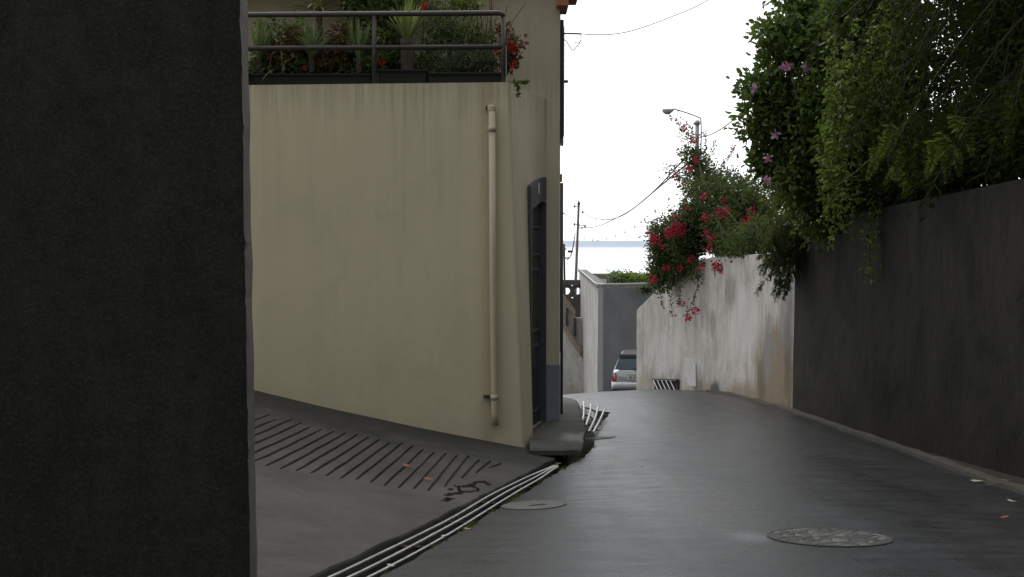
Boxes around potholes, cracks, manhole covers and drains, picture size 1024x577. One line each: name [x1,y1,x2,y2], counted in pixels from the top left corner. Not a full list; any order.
drain grate [581,401,606,434]
drain grate [328,464,559,577]
manhole cover [767,527,893,547]
manhole cover [500,500,567,510]
